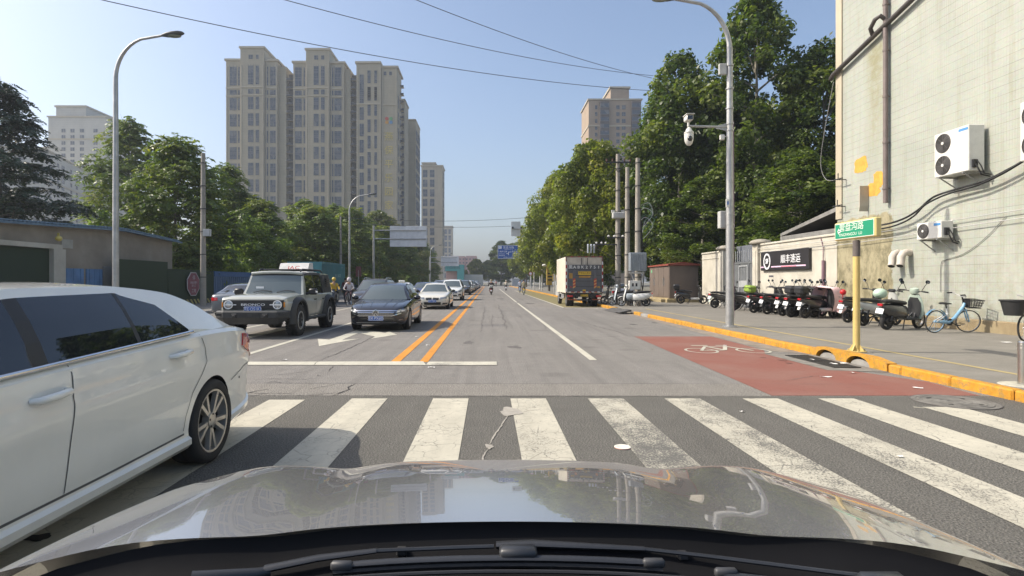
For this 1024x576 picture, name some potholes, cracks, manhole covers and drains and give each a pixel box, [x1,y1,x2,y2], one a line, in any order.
drain grate [785,346,897,372]
crack [249,336,374,395]
manhole cover [909,394,1003,410]
